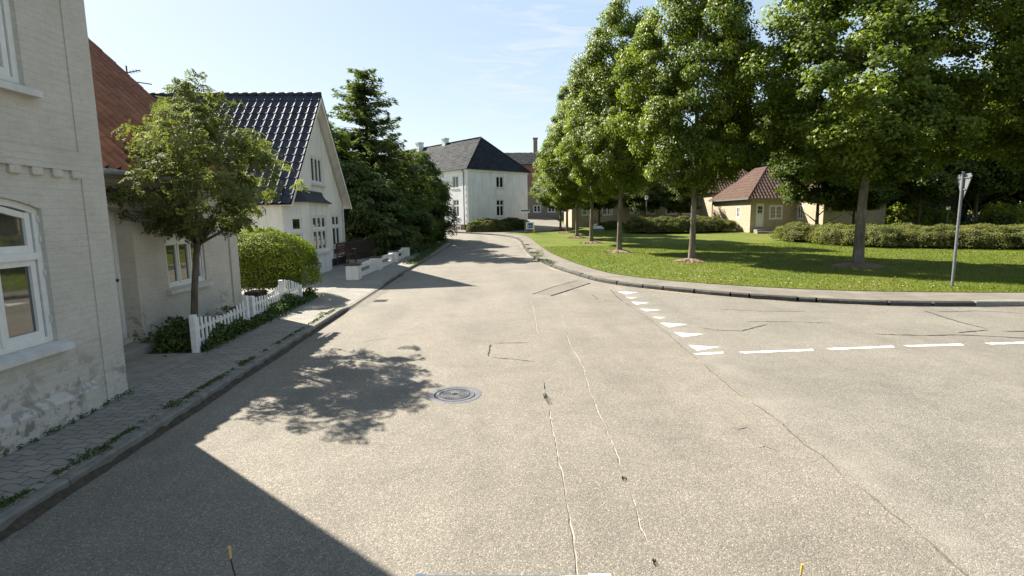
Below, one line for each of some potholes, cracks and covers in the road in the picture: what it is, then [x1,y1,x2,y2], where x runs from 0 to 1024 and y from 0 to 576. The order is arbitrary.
crack [882,310,1024,339]
manhole cover [428,386,482,404]
crack [699,309,820,331]
crack [549,411,578,575]
crack [488,280,649,546]
